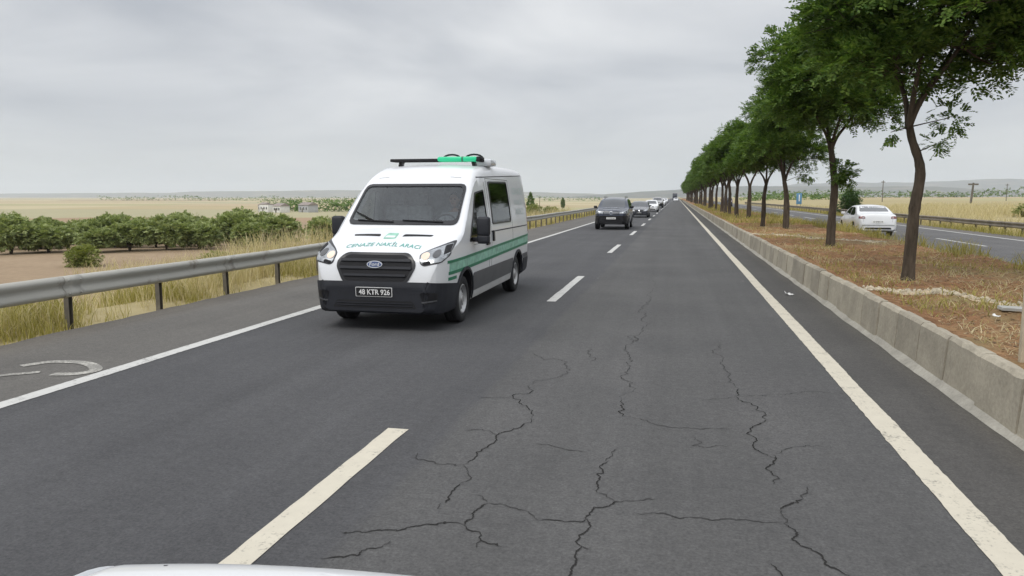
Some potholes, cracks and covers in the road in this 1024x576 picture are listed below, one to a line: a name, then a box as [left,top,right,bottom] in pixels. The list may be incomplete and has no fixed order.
crack [328,354,650,576]
crack [618,275,721,448]
crack [702,342,826,483]
